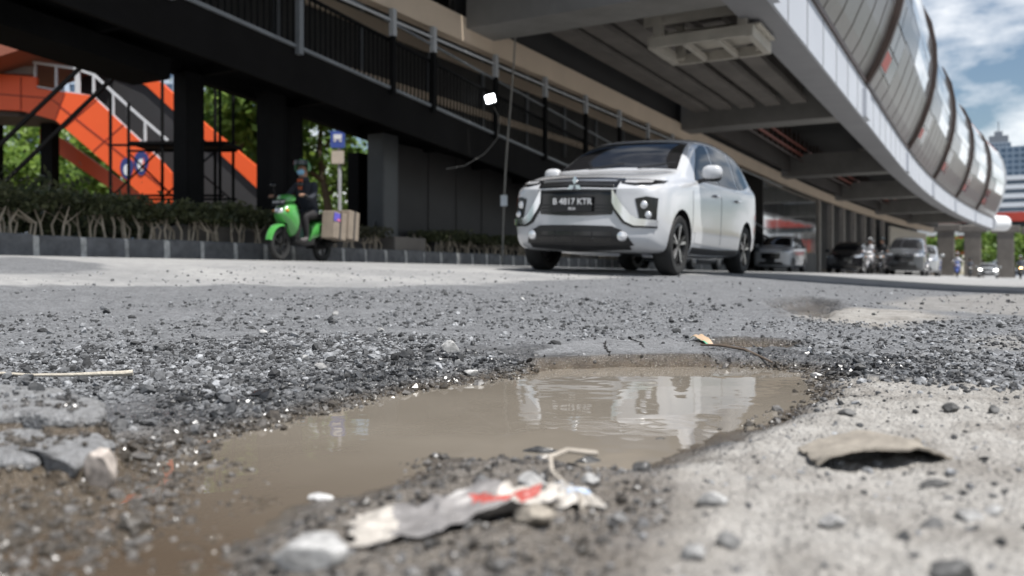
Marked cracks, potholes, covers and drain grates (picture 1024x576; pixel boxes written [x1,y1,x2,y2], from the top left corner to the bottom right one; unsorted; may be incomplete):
pothole [12,354,840,576]
pothole [691,336,815,349]
pothole [746,294,870,320]
